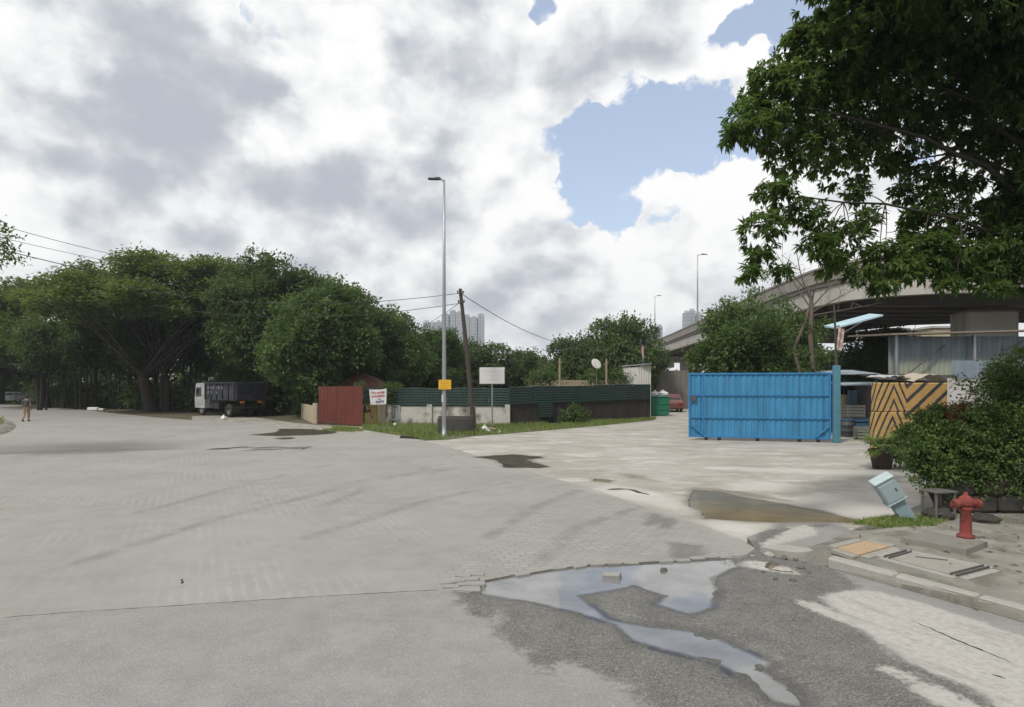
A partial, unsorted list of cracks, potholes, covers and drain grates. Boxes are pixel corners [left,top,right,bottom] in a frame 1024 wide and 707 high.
manhole cover [827,538,901,560]
pothole [688,490,856,523]
pothole [466,553,821,707]
crack [908,619,1008,679]
